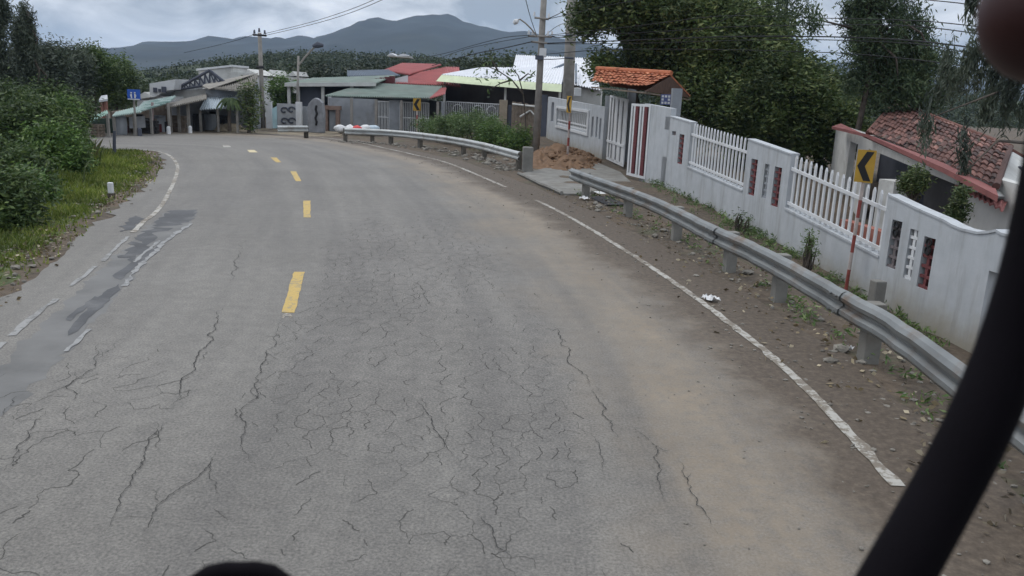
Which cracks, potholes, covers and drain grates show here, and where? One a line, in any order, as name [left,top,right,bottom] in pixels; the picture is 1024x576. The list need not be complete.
crack [555,327,666,490]
crack [106,202,649,576]
crack [0,308,227,576]
crack [683,465,713,527]
